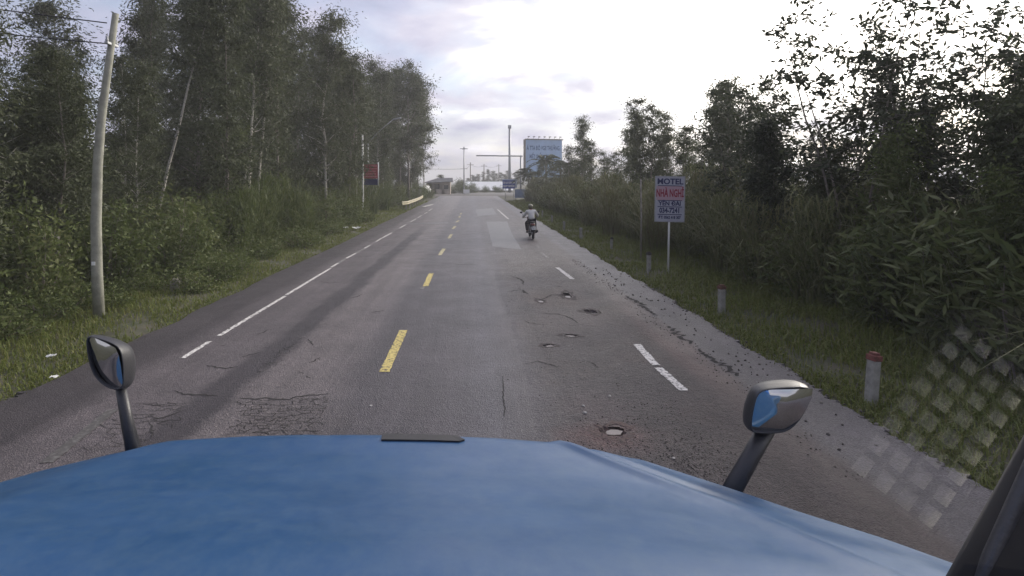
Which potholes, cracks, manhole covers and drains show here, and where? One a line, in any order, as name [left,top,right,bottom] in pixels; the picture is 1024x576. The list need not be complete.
crack [207,329,330,436]
crack [508,277,578,325]
pothole [556,289,577,300]
crack [71,391,218,453]
pothole [586,420,636,443]
